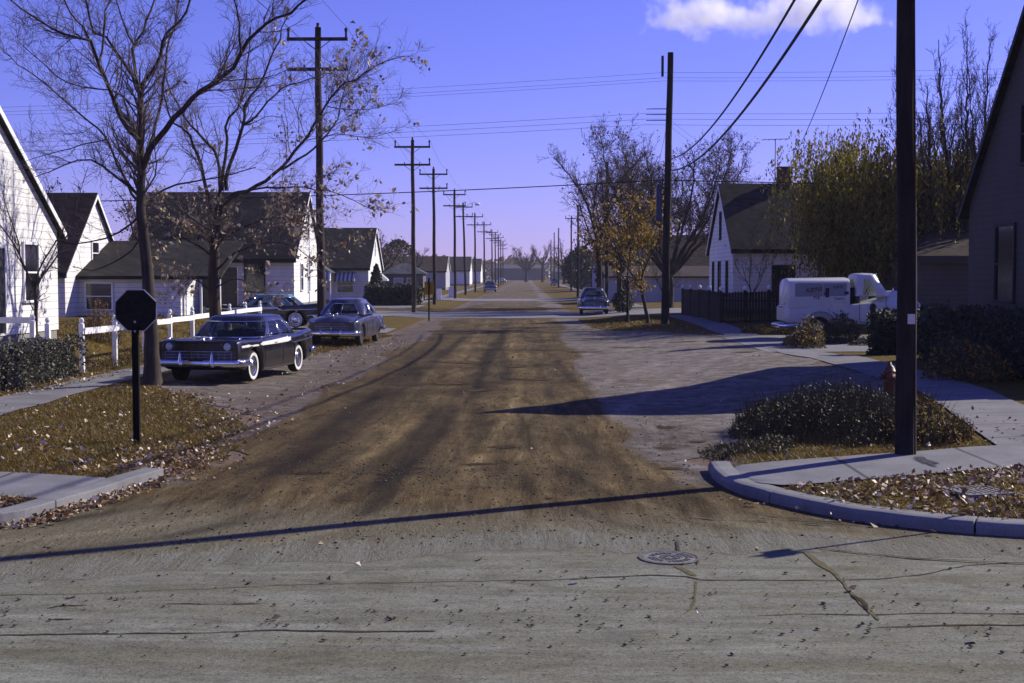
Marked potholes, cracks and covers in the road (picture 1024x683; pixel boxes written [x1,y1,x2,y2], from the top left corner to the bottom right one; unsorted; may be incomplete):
crack [6,540,1024,627]
manhole cover [639,550,701,565]
drain grate [940,485,1015,498]
